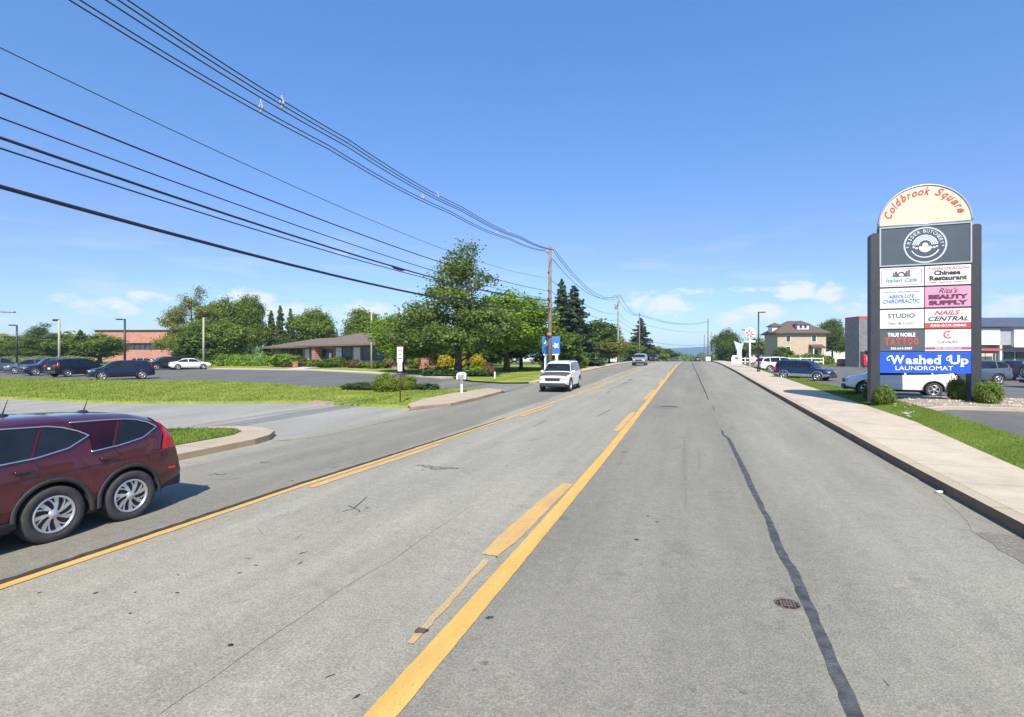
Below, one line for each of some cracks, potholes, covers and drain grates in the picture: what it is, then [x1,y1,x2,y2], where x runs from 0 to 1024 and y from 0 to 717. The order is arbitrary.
manhole cover [774,598,802,610]
